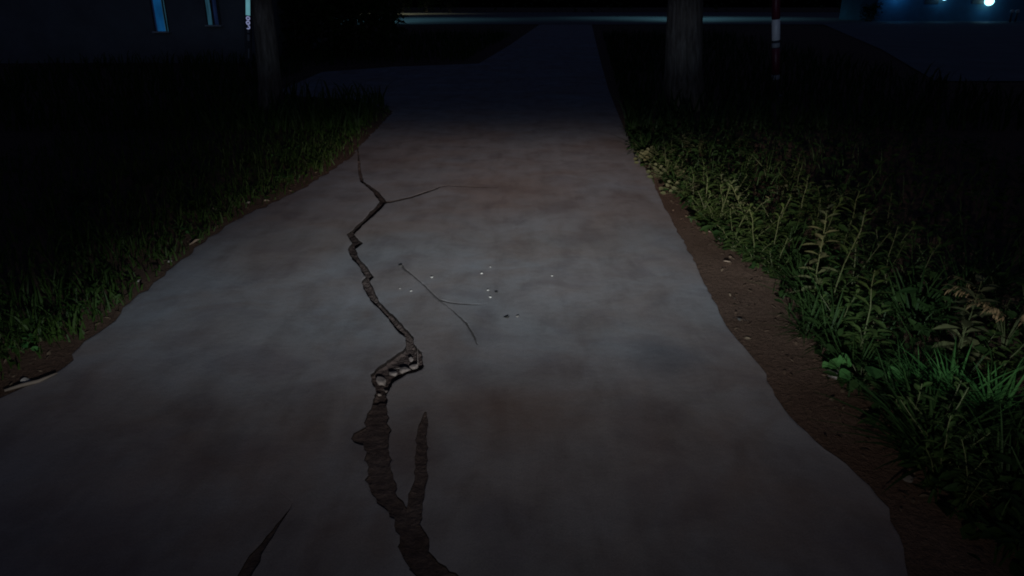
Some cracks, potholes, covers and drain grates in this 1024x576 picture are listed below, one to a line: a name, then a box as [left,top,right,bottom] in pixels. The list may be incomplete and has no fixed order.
crack [238,149,494,576]
